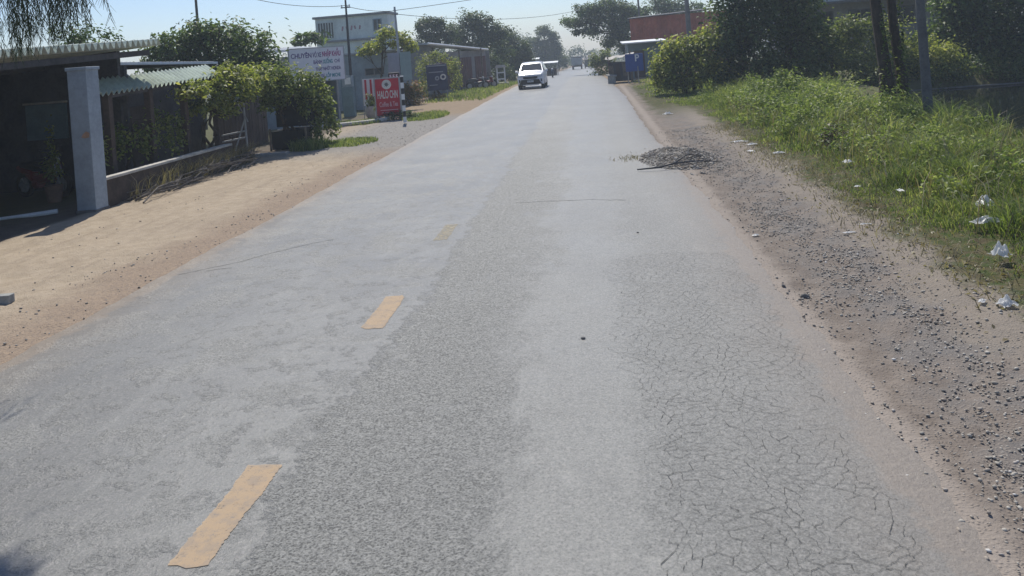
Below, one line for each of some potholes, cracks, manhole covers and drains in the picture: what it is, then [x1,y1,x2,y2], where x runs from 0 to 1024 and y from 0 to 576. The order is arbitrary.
crack [647,422,927,576]
crack [603,252,834,436]
